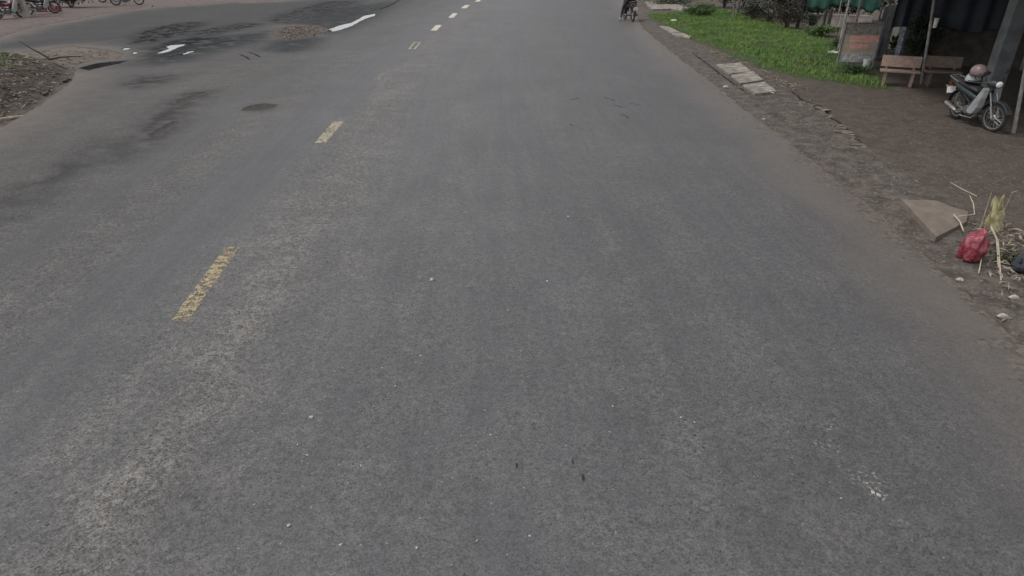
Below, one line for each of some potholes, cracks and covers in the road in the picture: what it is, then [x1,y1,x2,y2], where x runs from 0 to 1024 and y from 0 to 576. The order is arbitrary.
crack [791,91,868,148]
pothole [241,103,278,111]
